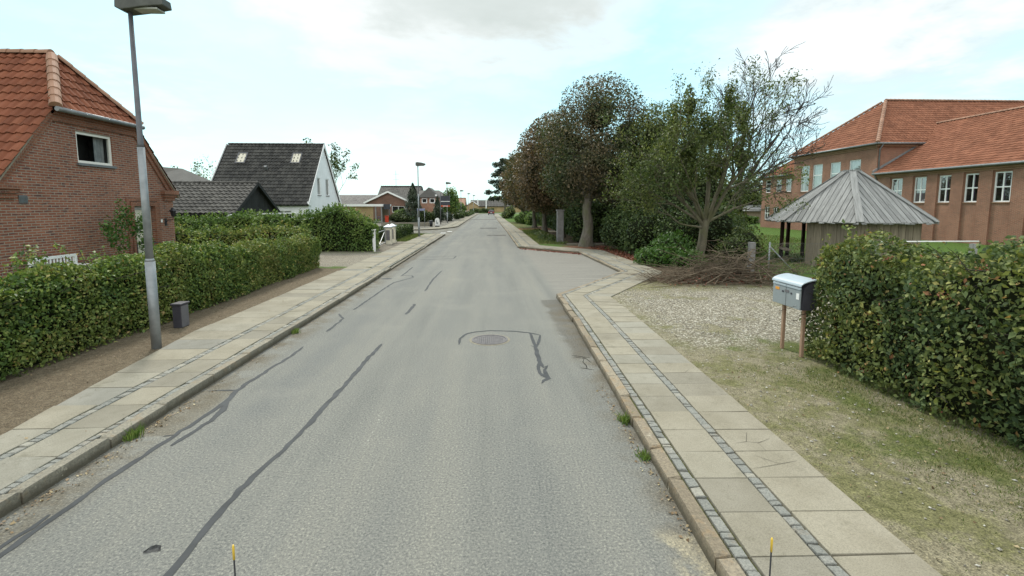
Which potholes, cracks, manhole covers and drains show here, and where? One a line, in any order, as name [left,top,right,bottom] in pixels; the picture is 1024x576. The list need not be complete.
pothole [143,545,161,554]
manhole cover [469,334,510,346]
